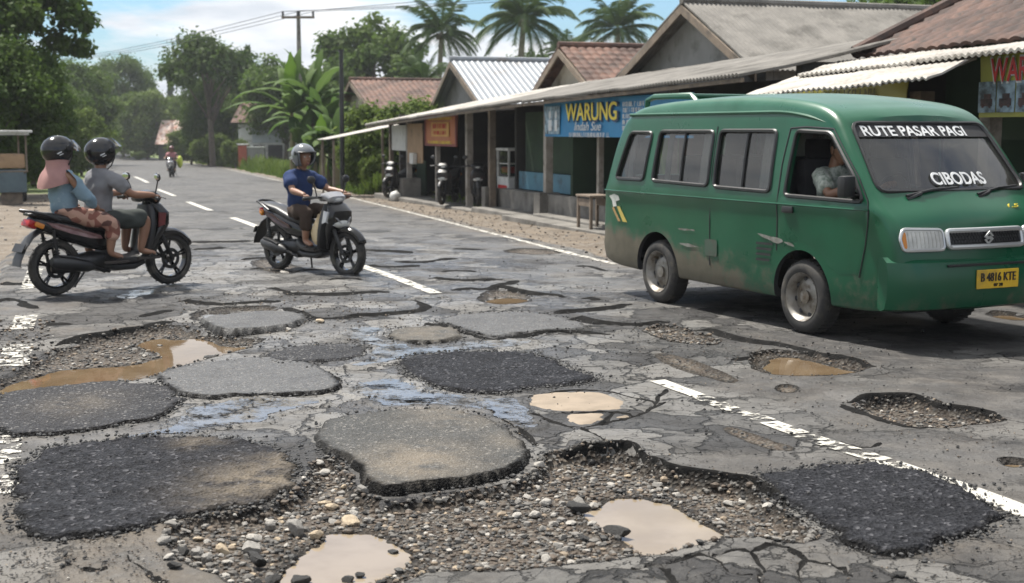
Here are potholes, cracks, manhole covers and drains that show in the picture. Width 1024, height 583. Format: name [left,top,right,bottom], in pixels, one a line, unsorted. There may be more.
crack [488,389,788,509]
pothole [476,289,535,304]
pothole [748,349,871,376]
pothole [0,324,265,390]
crack [631,542,853,583]
pothole [853,394,1007,428]
pothole [641,324,722,345]
pothole [166,442,819,583]
